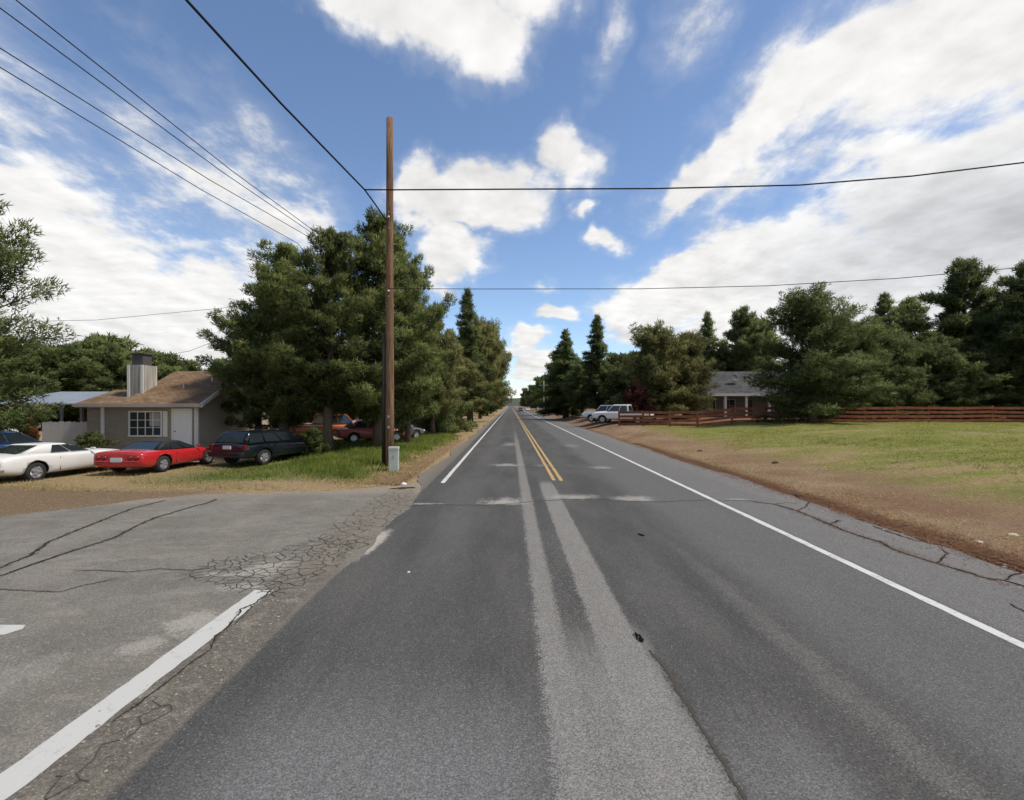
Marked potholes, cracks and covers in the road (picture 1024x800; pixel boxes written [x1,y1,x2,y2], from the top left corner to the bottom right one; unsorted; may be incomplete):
crack [0,489,421,800]
crack [407,499,1024,612]
